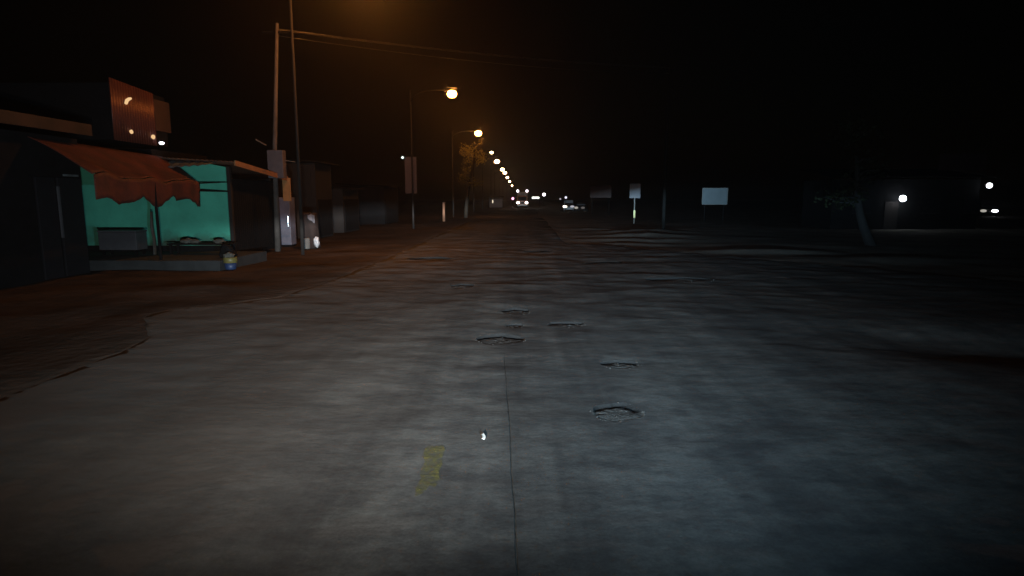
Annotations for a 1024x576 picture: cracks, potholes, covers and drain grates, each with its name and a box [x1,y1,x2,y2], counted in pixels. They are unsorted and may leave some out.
pothole [476,333,526,345]
pothole [592,402,645,422]
pothole [601,360,639,369]
crack [504,360,519,576]
